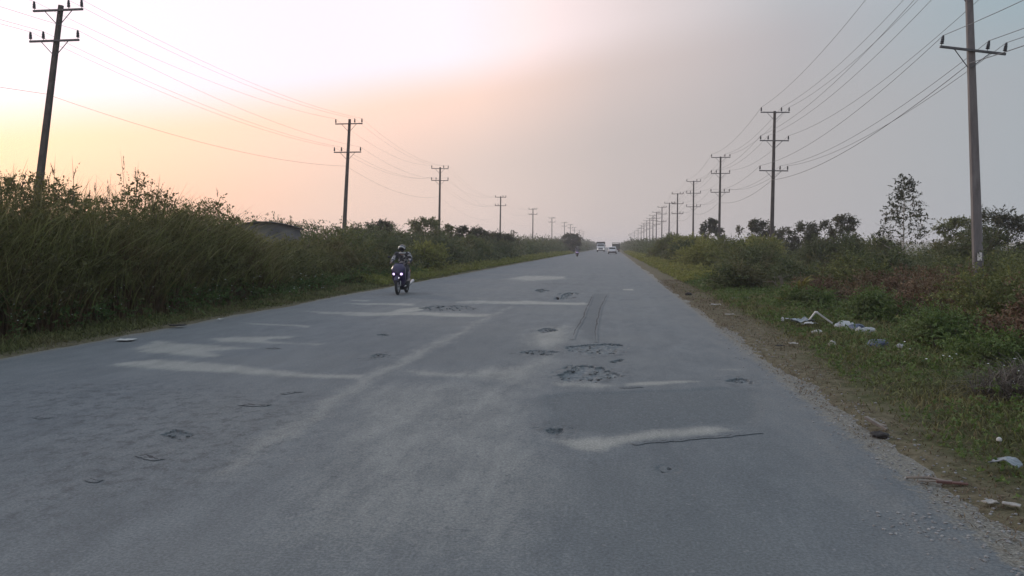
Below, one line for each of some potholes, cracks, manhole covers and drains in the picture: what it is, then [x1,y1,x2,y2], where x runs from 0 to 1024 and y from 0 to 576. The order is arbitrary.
pothole [659,465,680,473]
pothole [362,352,400,360]
pothole [510,349,571,357]
pothole [556,343,632,356]
pothole [547,364,635,384]
pothole [552,291,582,300]
crack [632,431,762,445]
pothole [148,427,207,443]
